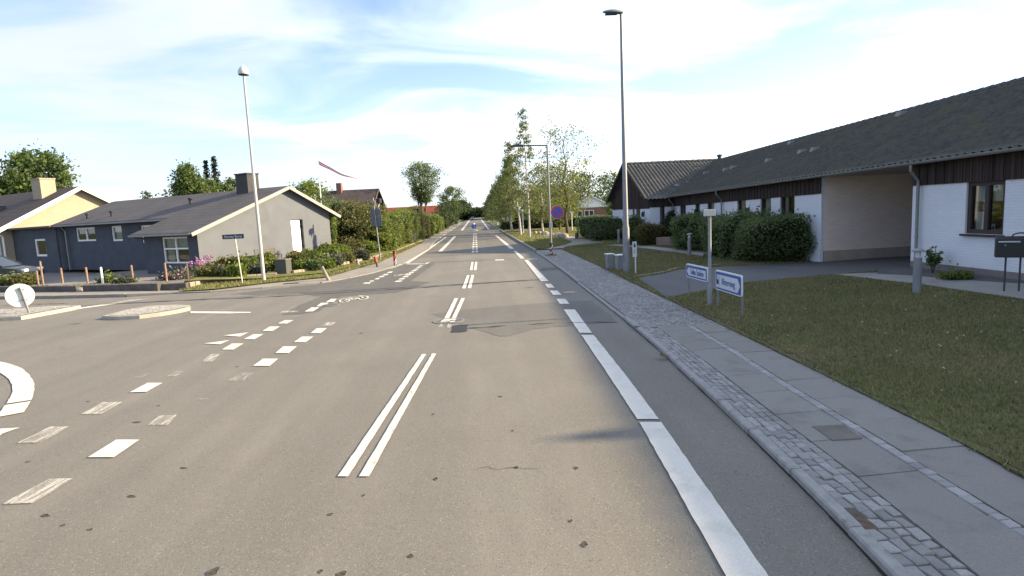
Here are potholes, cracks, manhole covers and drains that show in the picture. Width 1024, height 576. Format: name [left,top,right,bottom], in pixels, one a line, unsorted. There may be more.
manhole cover [812,424,862,441]
